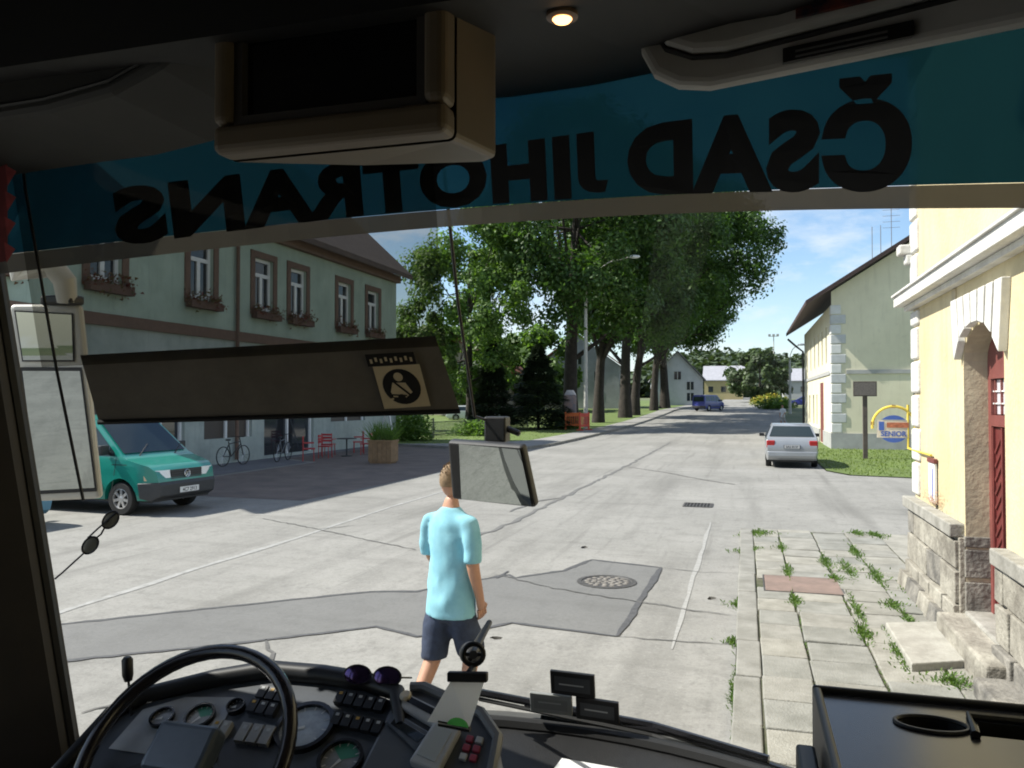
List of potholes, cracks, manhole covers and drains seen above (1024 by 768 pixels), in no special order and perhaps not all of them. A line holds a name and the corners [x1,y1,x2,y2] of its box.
manhole cover [577,575,637,589]
crack [263,518,416,550]
manhole cover [762,574,845,597]
